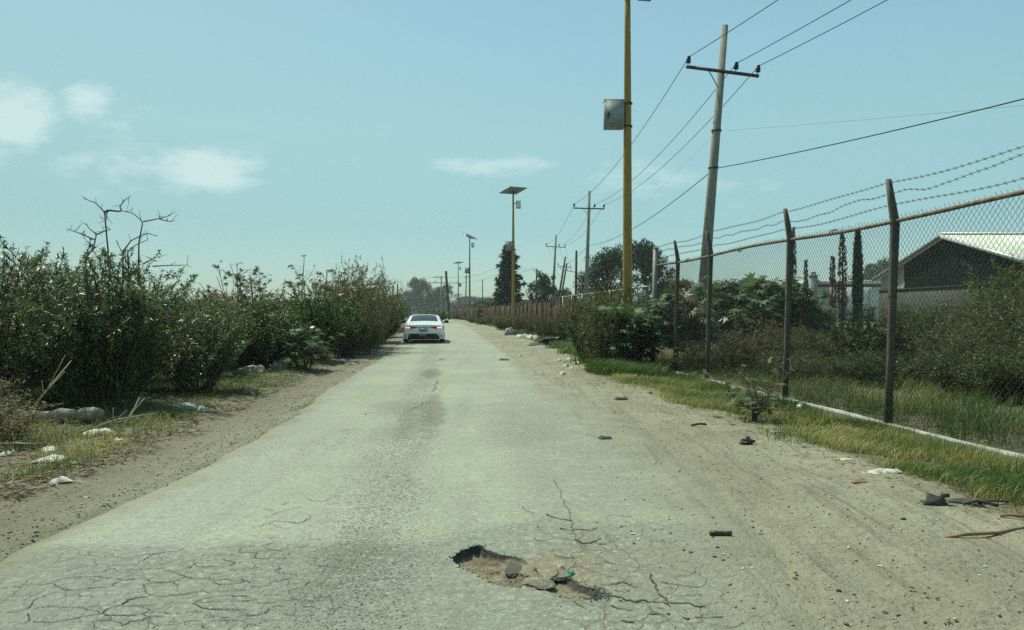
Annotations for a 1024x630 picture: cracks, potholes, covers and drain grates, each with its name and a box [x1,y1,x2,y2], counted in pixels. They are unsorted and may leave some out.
crack [2,498,331,628]
pothole [536,578,604,600]
crack [602,573,722,622]
pothole [451,545,527,587]
crack [521,480,605,558]
